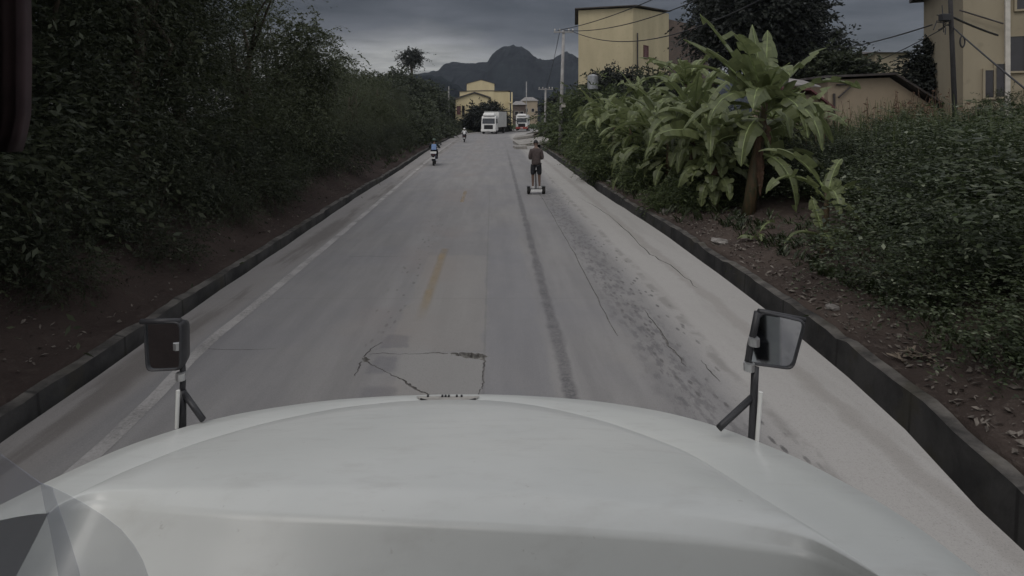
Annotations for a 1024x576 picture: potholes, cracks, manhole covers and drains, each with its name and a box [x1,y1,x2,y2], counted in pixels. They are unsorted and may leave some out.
crack [540,195,618,336]
crack [646,312,719,380]
crack [354,344,486,395]
